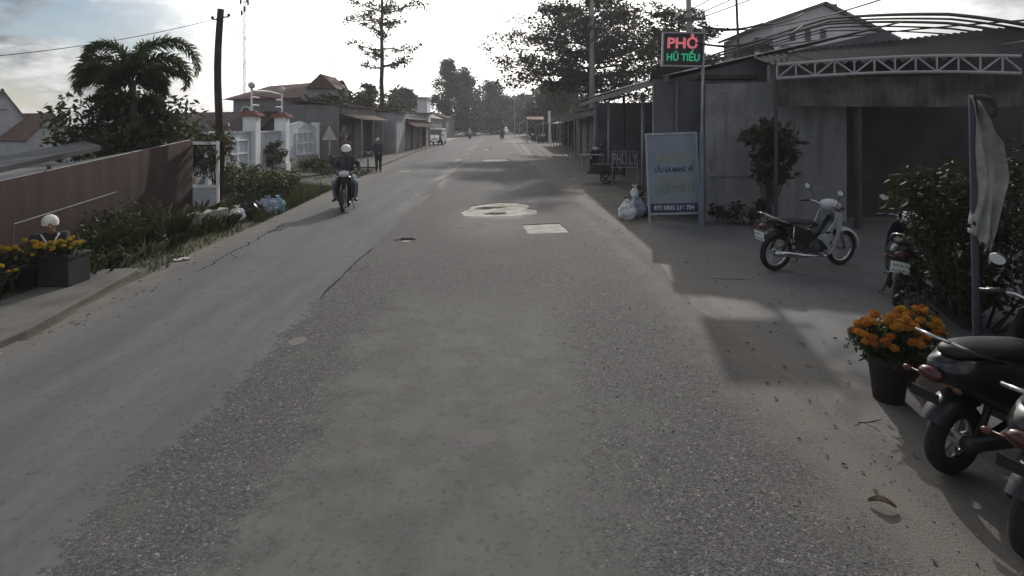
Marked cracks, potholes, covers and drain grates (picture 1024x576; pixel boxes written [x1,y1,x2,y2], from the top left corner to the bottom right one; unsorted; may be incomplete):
crack [319,248,373,300]
crack [189,225,283,274]
